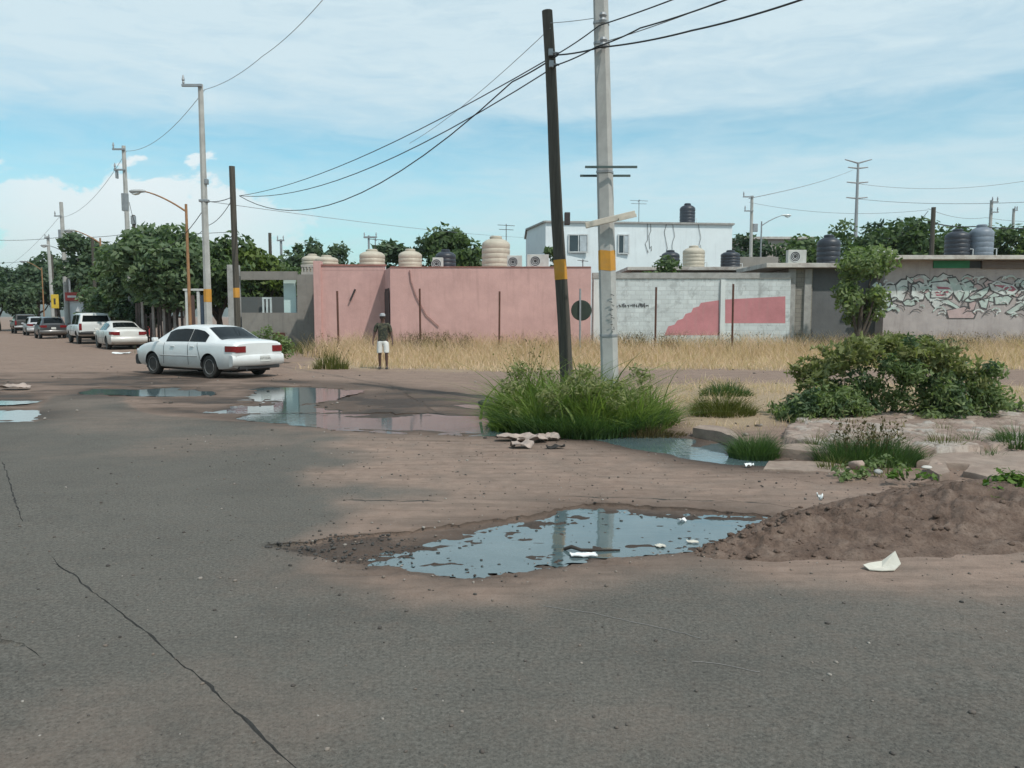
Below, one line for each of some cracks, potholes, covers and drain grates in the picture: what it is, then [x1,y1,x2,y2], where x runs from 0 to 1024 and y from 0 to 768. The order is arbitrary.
pothole [236,412,496,437]
crack [2,462,23,522]
crack [52,557,296,768]
pothole [78,386,199,397]
pothole [268,503,771,579]
